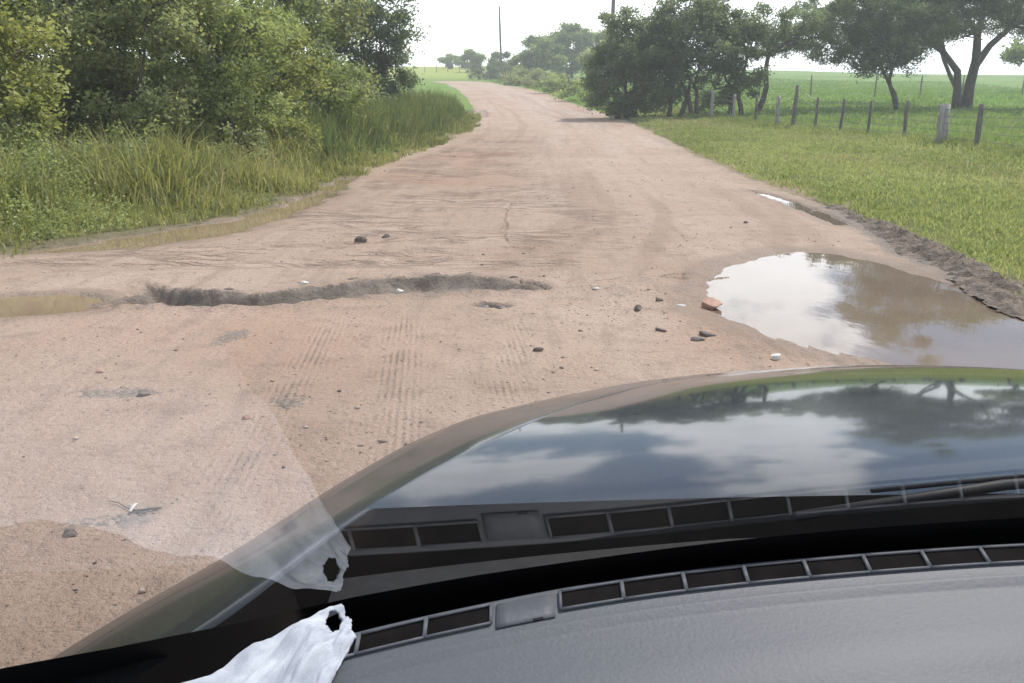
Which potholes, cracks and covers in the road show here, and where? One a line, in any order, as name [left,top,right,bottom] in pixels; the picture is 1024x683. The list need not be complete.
pothole [650,245,1020,366]
pothole [728,188,868,230]
pothole [0,287,132,325]
pothole [90,272,563,314]
